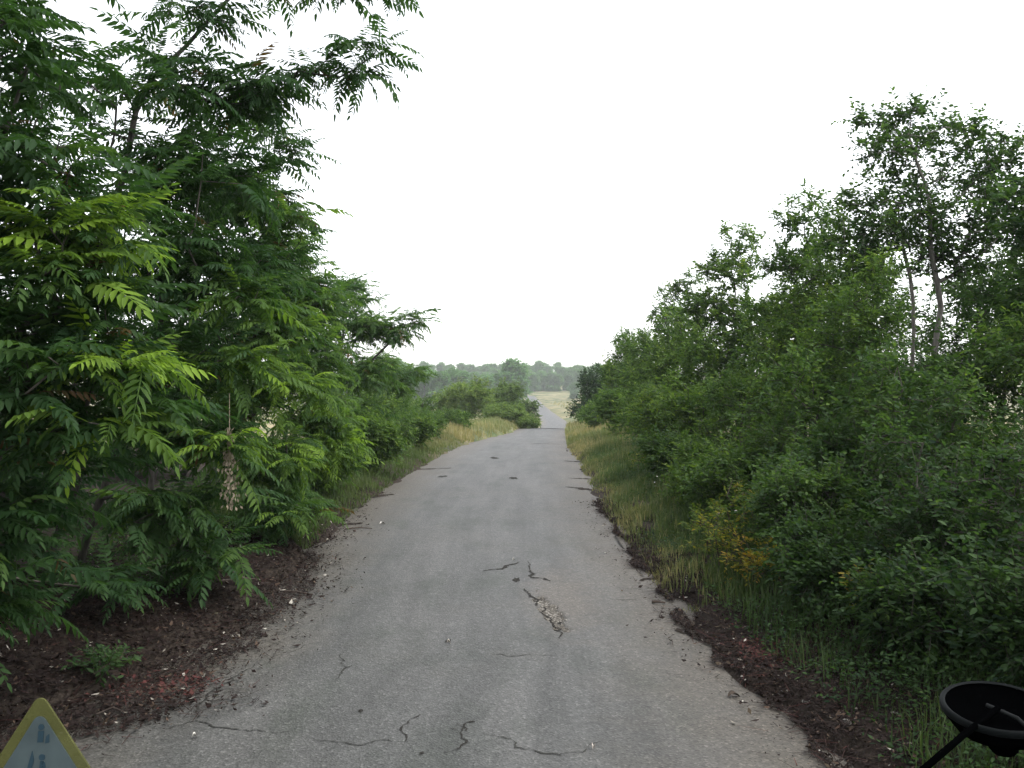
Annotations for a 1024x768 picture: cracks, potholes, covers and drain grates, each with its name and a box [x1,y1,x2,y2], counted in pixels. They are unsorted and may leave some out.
crack [483,562,551,581]
pothole [524,588,570,632]
crack [311,715,600,755]
